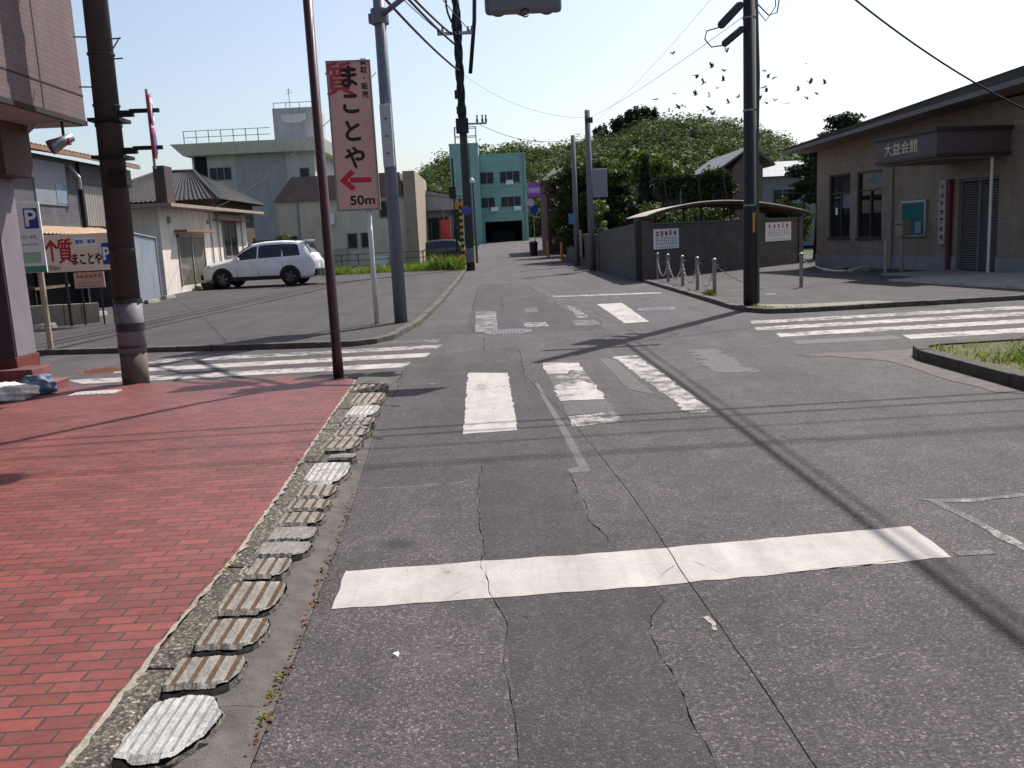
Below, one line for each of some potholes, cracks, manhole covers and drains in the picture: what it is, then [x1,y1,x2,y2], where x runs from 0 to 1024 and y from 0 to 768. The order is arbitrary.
crack [569,473,628,542]
crack [477,463,532,767]
crack [648,589,717,767]
